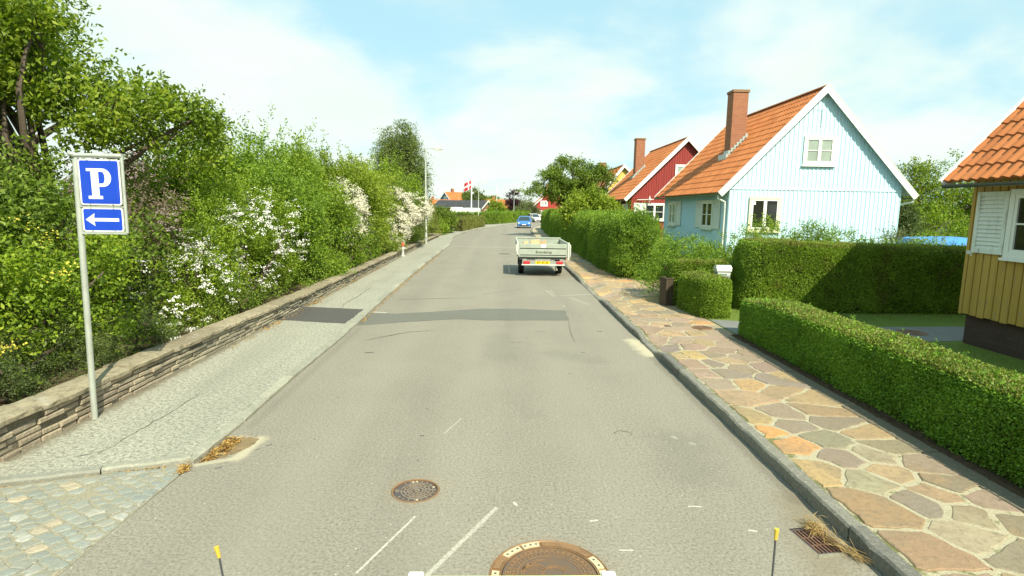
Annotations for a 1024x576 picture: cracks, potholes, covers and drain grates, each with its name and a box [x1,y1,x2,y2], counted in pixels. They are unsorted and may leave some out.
manhole cover [489,540,609,576]
drain grate [790,527,849,559]
manhole cover [391,479,440,503]
